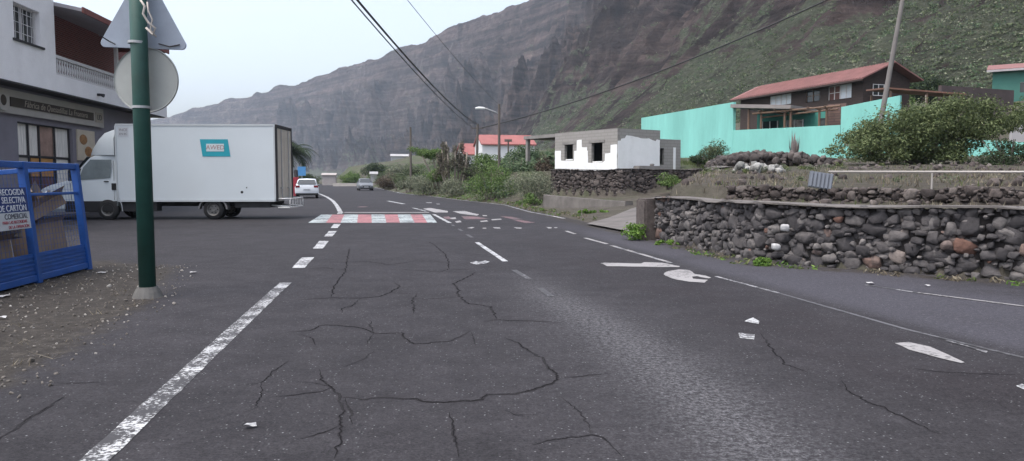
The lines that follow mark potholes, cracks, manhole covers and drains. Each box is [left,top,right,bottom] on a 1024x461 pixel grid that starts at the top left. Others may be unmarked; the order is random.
crack [760,333,943,436]
crack [237,243,624,458]
